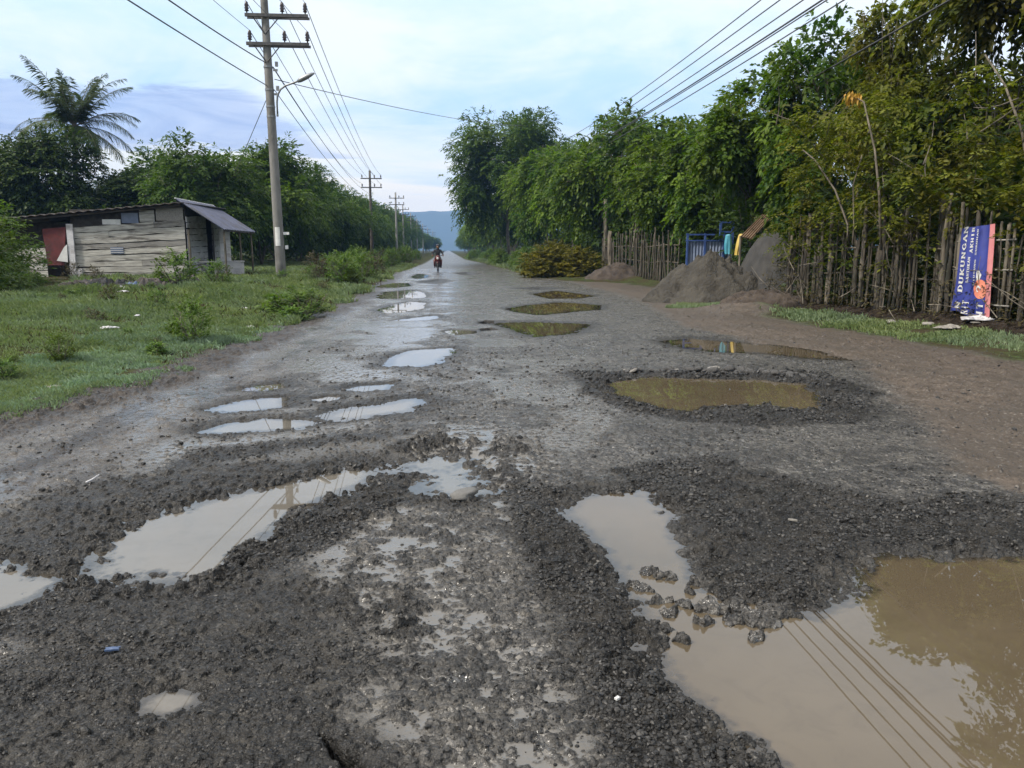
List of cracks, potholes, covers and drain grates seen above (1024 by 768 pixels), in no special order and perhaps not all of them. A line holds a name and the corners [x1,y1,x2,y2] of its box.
pothole [118,670,226,725]
pothole [589,370,854,415]
pothole [193,392,303,414]
pothole [489,320,601,337]
pothole [532,479,1024,768]
pothole [499,301,609,315]
pothole [370,301,432,313]
pothole [369,345,467,368]
pothole [303,392,444,424]
pothole [0,544,102,617]
pothole [649,335,873,361]
pothole [25,452,394,615]
